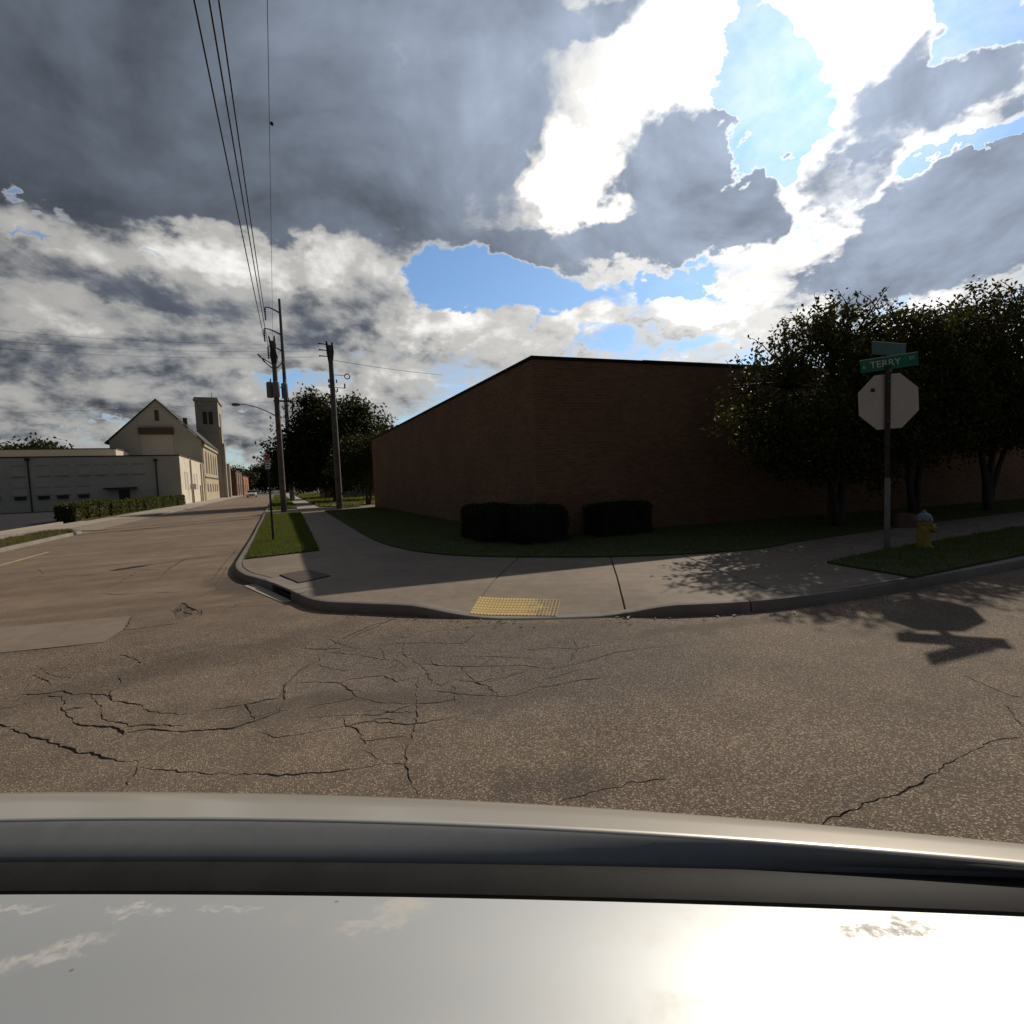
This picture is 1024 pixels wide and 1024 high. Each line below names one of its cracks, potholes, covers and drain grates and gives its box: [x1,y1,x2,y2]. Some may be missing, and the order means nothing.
pothole [170,603,195,619]
crack [821,675,1024,825]
drain grate [264,570,330,602]
crack [0,546,683,796]
crack [560,779,670,802]
